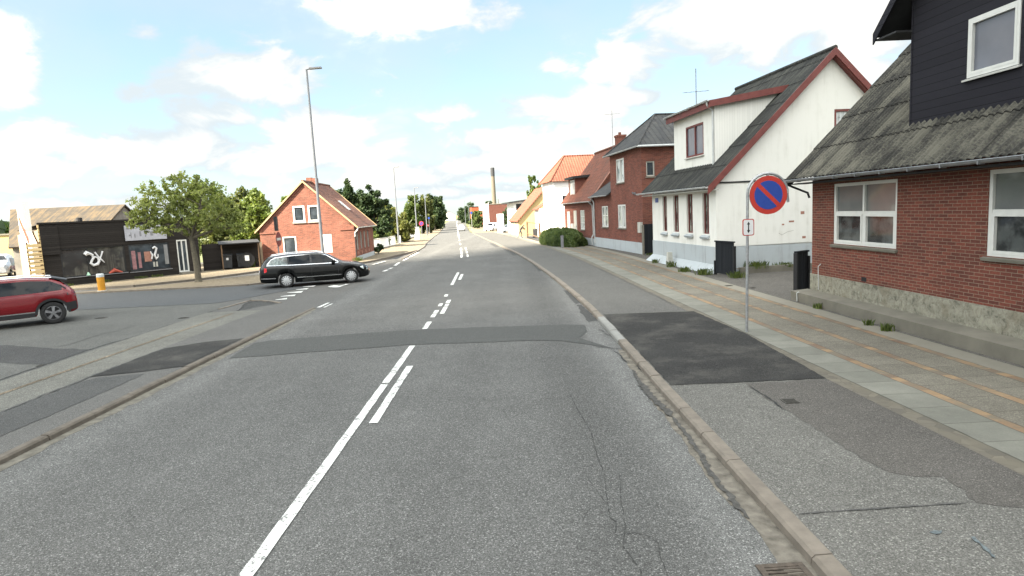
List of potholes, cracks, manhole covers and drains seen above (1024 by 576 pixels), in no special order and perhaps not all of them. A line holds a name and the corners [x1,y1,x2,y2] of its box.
drain grate [755,562,814,576]
crack [570,395,666,574]
crack [599,329,784,519]
